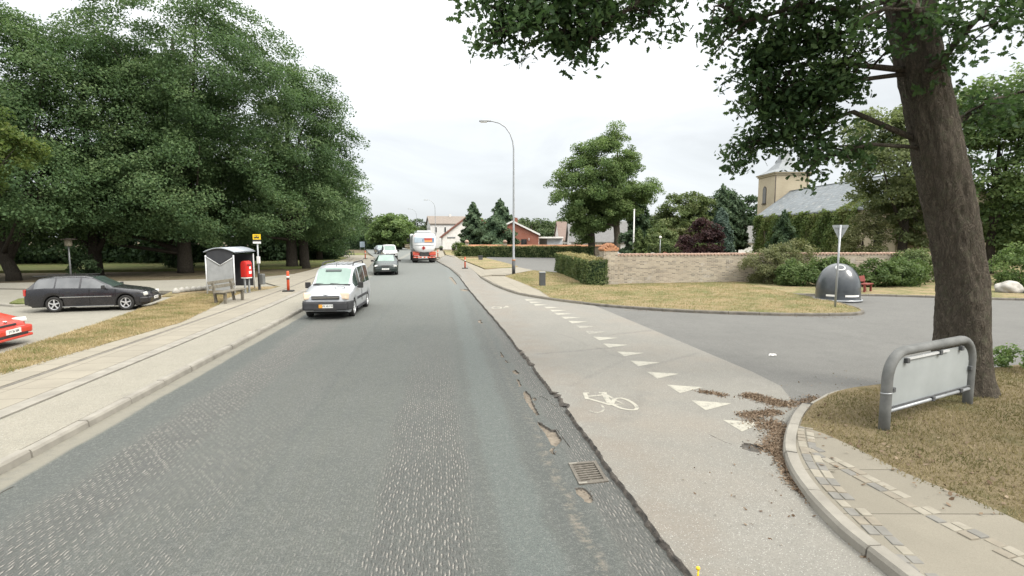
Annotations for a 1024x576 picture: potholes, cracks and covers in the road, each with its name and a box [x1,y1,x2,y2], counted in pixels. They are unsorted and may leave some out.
pothole [537,421,563,447]
pothole [740,441,764,453]
pothole [523,391,540,415]
pothole [575,487,593,503]
drain grate [568,461,609,485]
